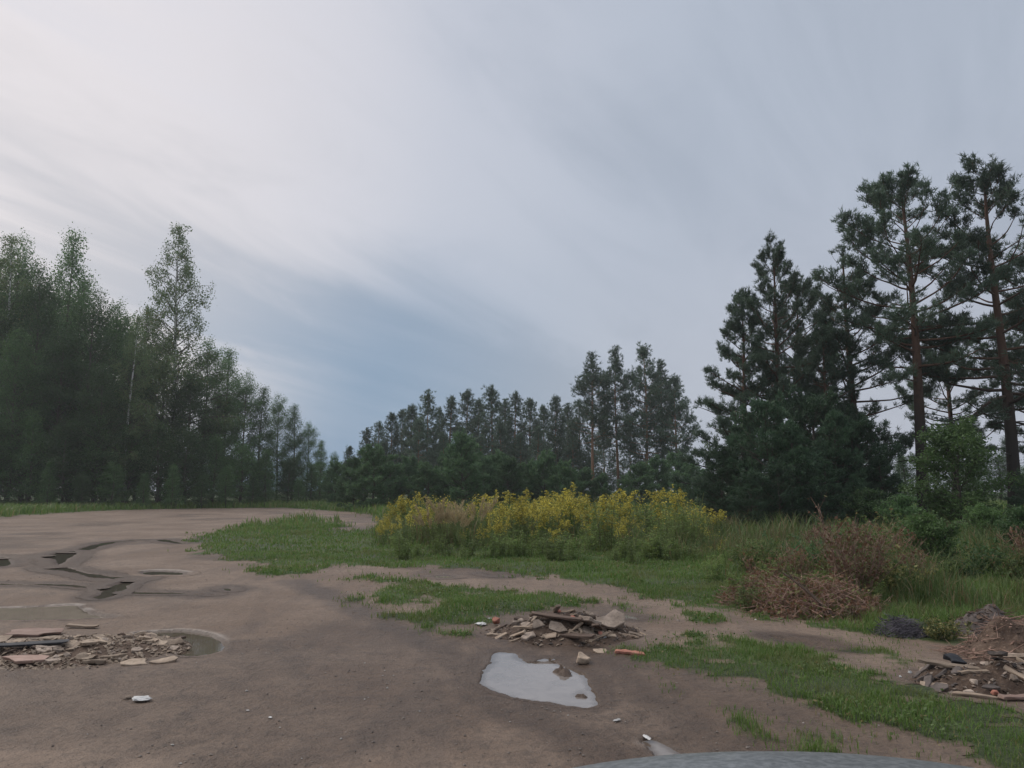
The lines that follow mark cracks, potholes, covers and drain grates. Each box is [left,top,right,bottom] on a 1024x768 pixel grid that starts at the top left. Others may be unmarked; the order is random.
pothole [127,569,201,577]
pothole [471,650,608,709]
pothole [128,628,235,657]
